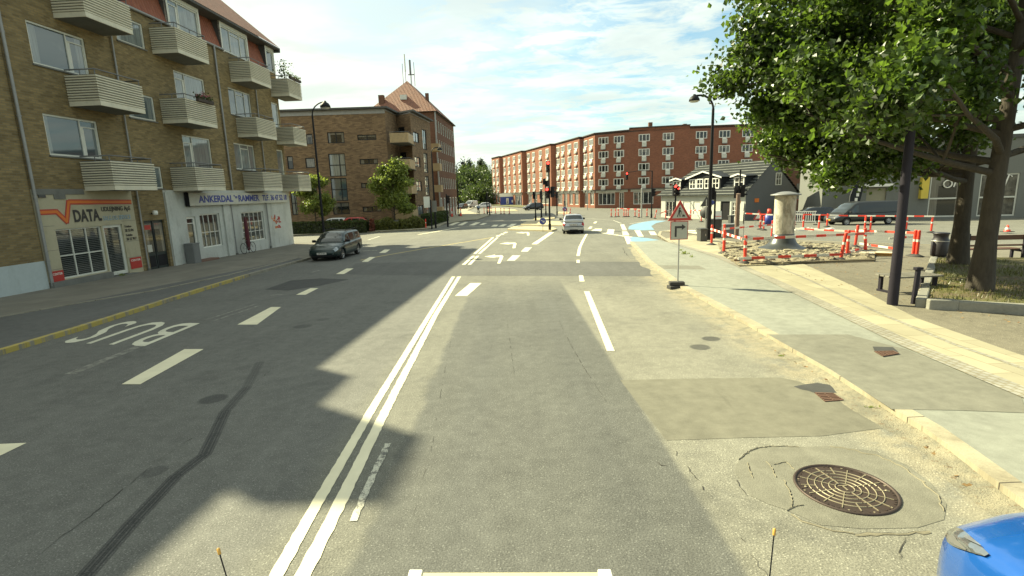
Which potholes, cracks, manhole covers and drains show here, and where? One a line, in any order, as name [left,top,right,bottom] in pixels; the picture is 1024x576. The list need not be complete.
drain grate [814,392,844,402]
manhole cover [793,464,902,516]
crack [737,445,945,558]
